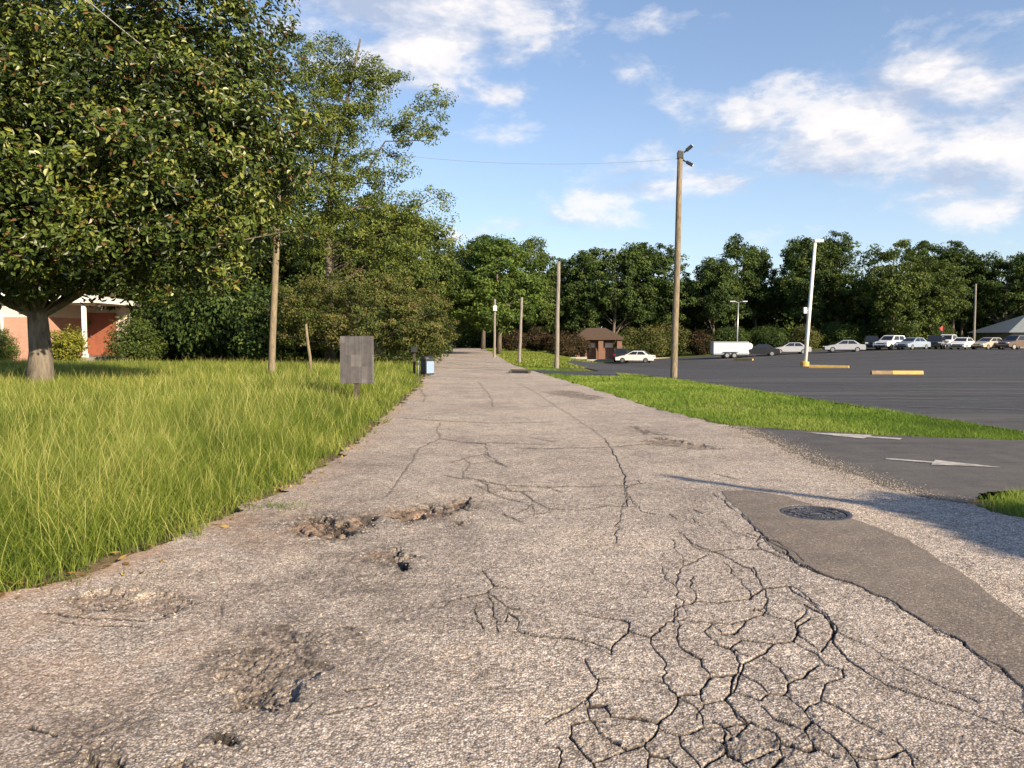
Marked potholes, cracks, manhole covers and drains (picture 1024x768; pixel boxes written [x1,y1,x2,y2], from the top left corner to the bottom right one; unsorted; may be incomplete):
pothole [383,546,428,574]
pothole [210,621,346,723]
manhole cover [779,506,853,520]
pothole [387,496,477,525]
pothole [282,513,384,544]
pothole [199,728,253,754]
crack [382,382,1024,768]
pothole [57,585,206,619]
